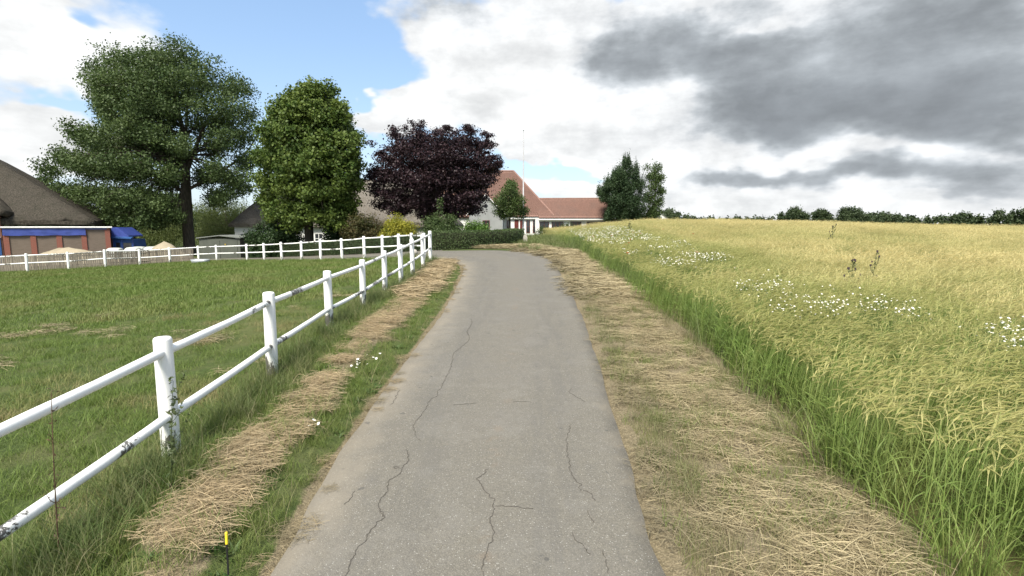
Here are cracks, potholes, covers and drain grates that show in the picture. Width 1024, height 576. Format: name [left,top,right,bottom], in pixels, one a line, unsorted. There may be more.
crack [566,426,609,573]
crack [345,323,473,576]
crack [476,469,533,576]
